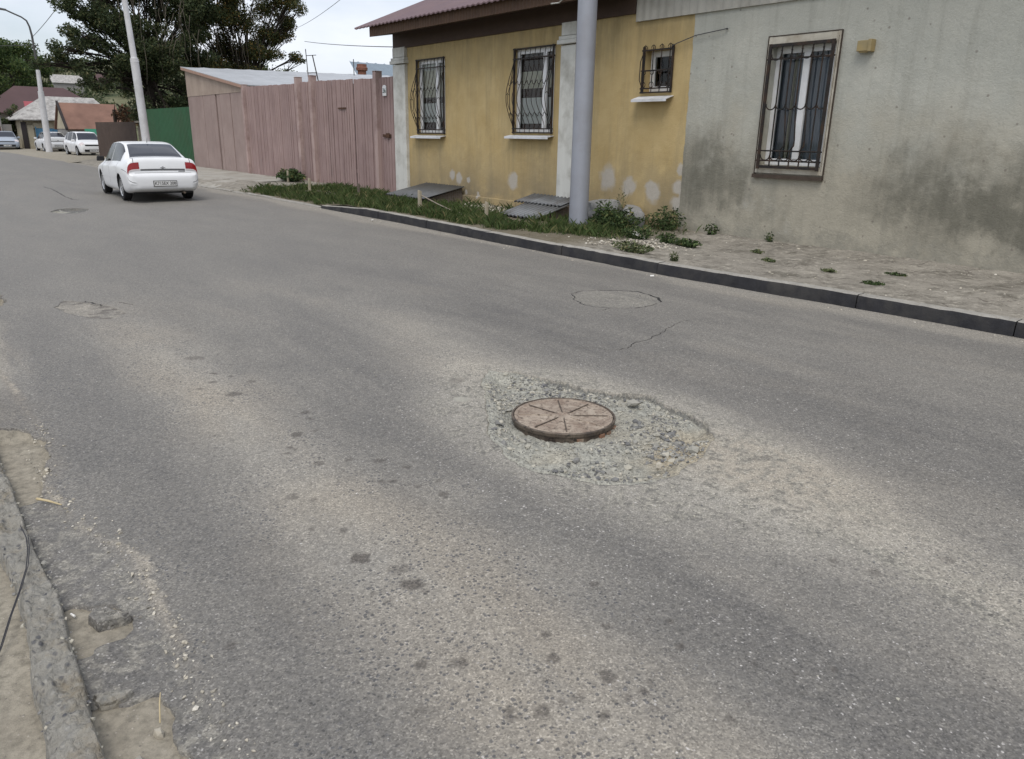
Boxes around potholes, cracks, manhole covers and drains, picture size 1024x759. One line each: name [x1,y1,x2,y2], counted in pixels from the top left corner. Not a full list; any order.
pothole [0,430,50,496]
pothole [481,370,715,485]
manhole cover [511,398,616,443]
crack [573,320,688,351]
